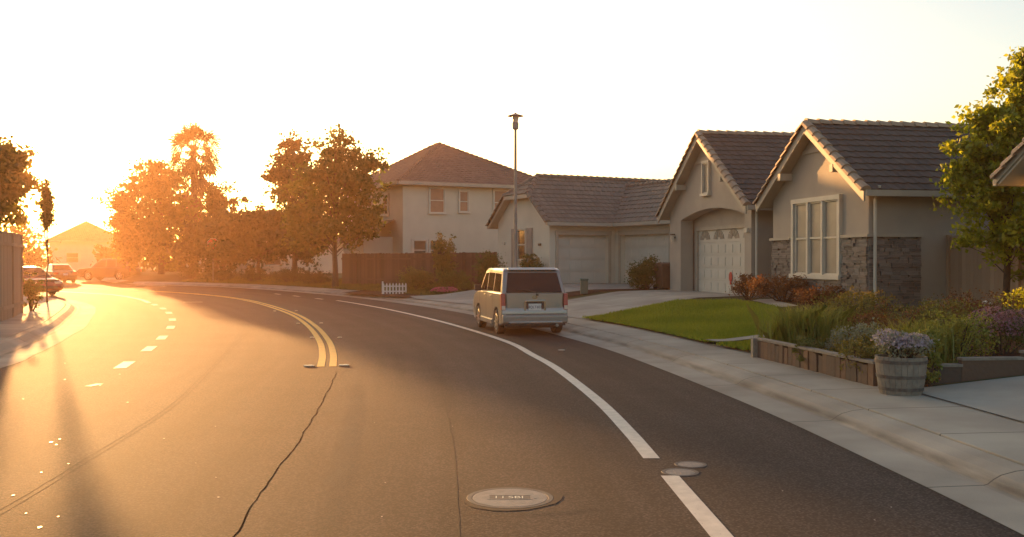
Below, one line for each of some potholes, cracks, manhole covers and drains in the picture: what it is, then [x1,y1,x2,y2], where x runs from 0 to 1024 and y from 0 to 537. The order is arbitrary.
manhole cover [461,486,563,511]
crack [445,396,460,537]
crack [233,364,381,537]
utility cover [661,468,699,476]
